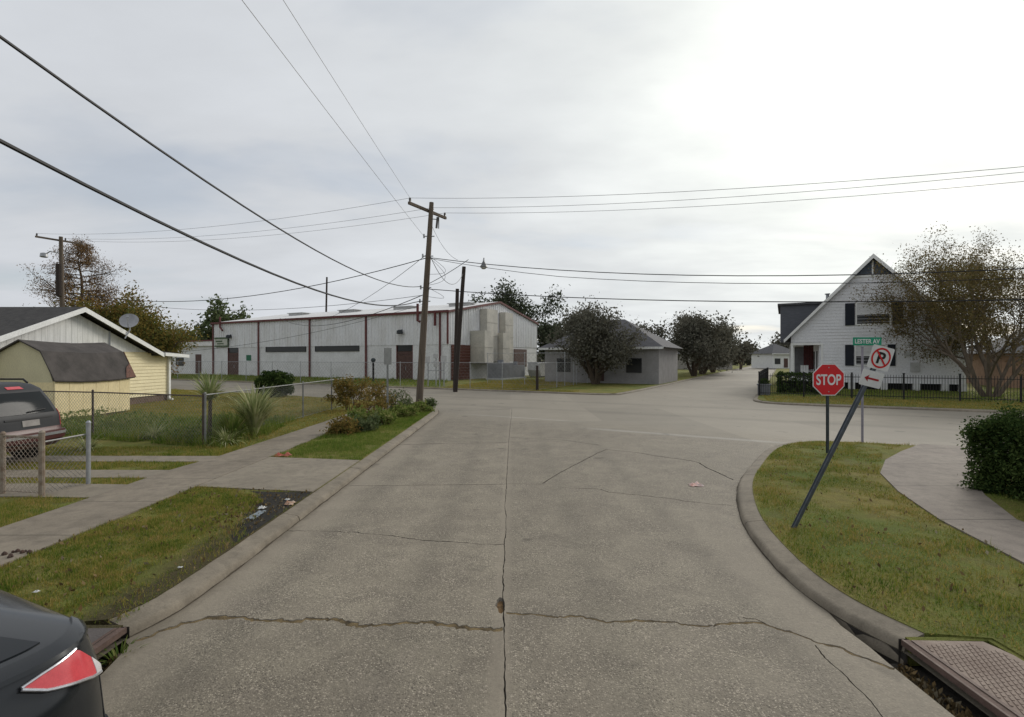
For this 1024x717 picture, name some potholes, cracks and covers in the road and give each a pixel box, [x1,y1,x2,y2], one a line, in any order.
crack [543,450,733,505]
crack [135,612,895,717]
pothole [495,597,505,614]
drain grate [87,625,129,675]
drain grate [830,613,1024,717]
crack [297,530,501,545]
